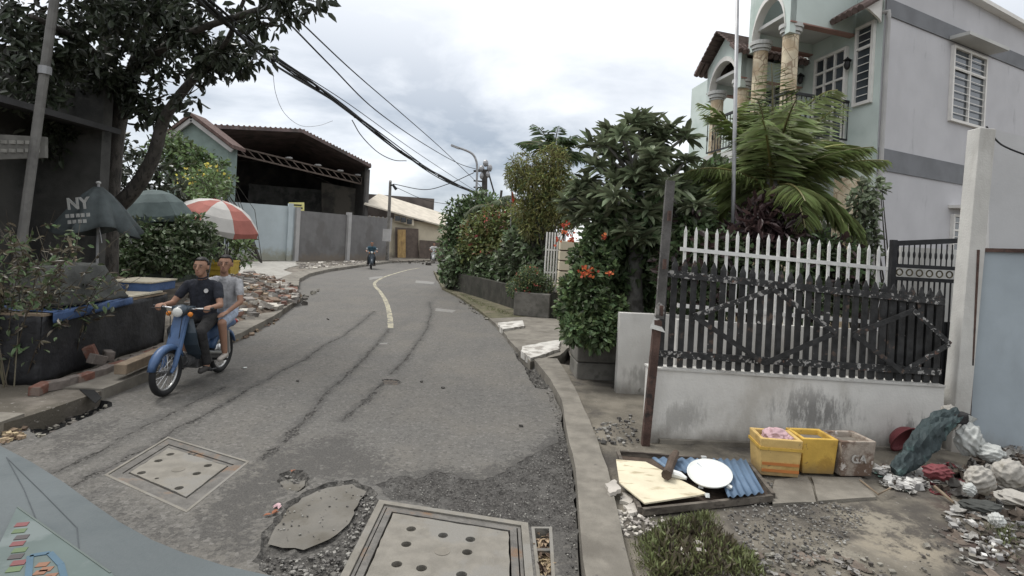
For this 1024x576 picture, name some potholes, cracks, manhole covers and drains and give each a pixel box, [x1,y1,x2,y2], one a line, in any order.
pothole [376,439,579,535]
pothole [277,470,310,492]
crack [54,303,432,488]
drain grate [531,527,556,576]
manhole cover [105,437,250,513]
manhole cover [340,500,533,576]
pothole [252,479,379,576]
